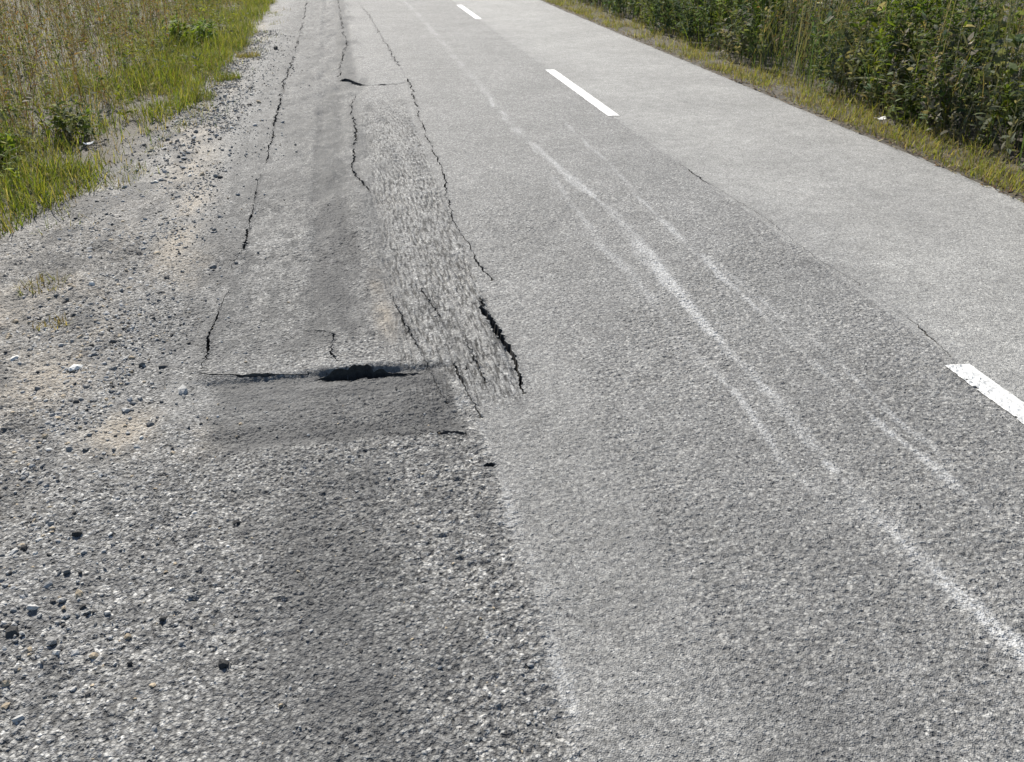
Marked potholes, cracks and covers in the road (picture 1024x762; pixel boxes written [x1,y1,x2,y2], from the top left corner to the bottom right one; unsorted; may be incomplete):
crack [337,0,350,77]
crack [194,1,339,380]
crack [678,163,952,357]
